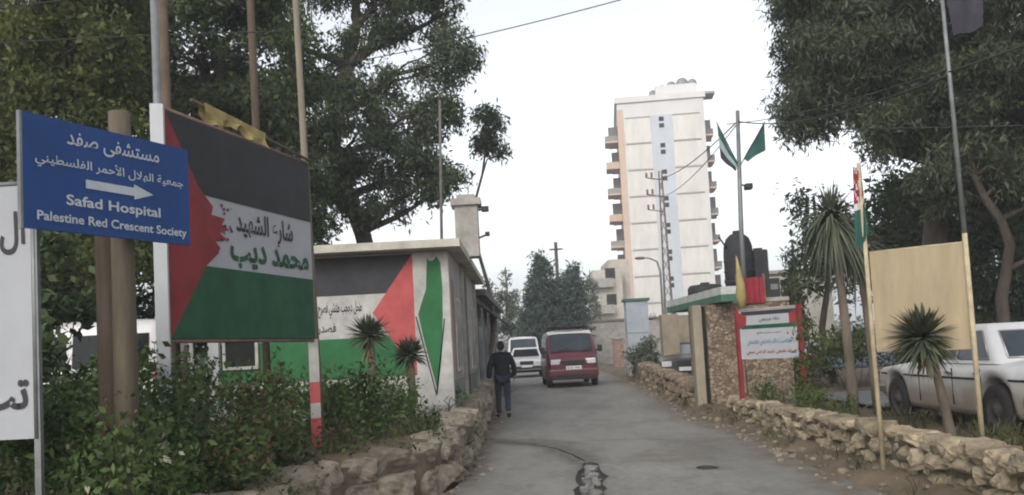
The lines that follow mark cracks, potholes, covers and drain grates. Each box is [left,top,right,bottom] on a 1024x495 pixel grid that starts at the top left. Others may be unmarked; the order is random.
pothole [573,462,608,495]
crack [497,441,586,462]
